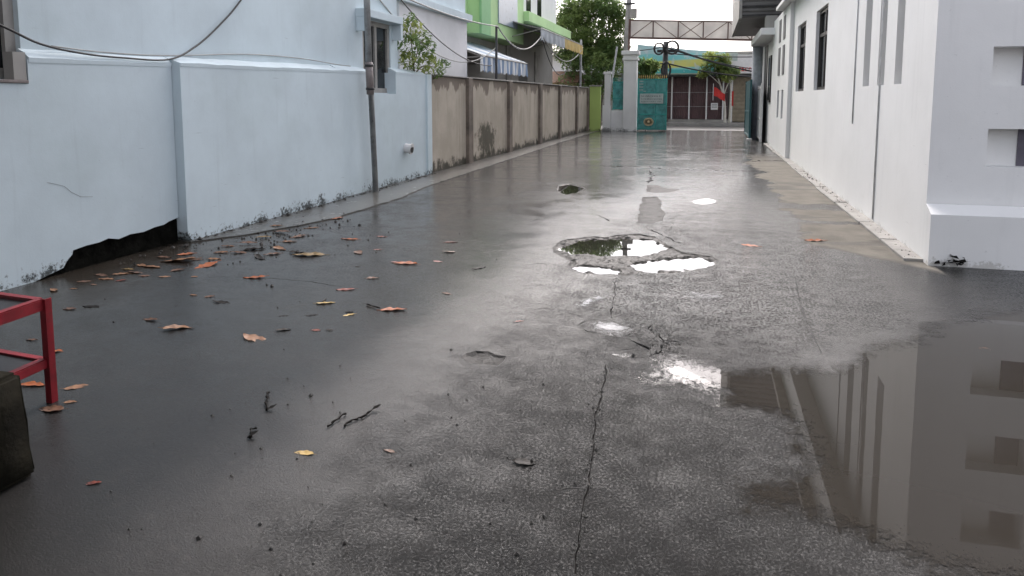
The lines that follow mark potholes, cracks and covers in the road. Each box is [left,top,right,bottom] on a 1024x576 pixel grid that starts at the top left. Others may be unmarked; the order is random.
crack [578,281,695,362]
pothole [558,185,583,195]
pothole [461,351,506,365]
pothole [556,238,714,275]
crack [558,366,612,576]
